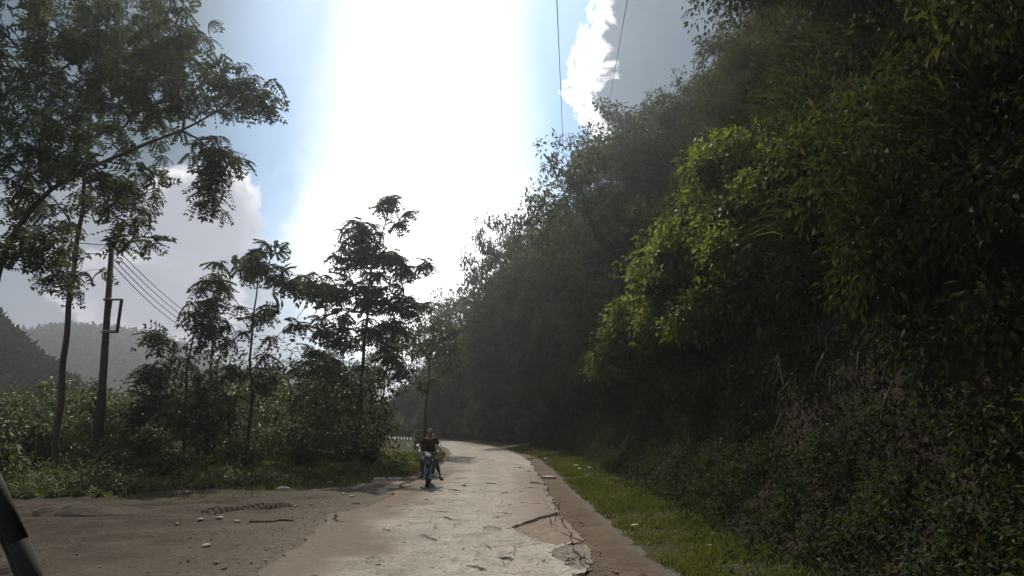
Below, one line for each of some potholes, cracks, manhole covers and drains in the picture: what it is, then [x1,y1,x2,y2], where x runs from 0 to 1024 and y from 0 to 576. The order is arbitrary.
crack [382,458,549,543]
pothole [550,544,593,571]
